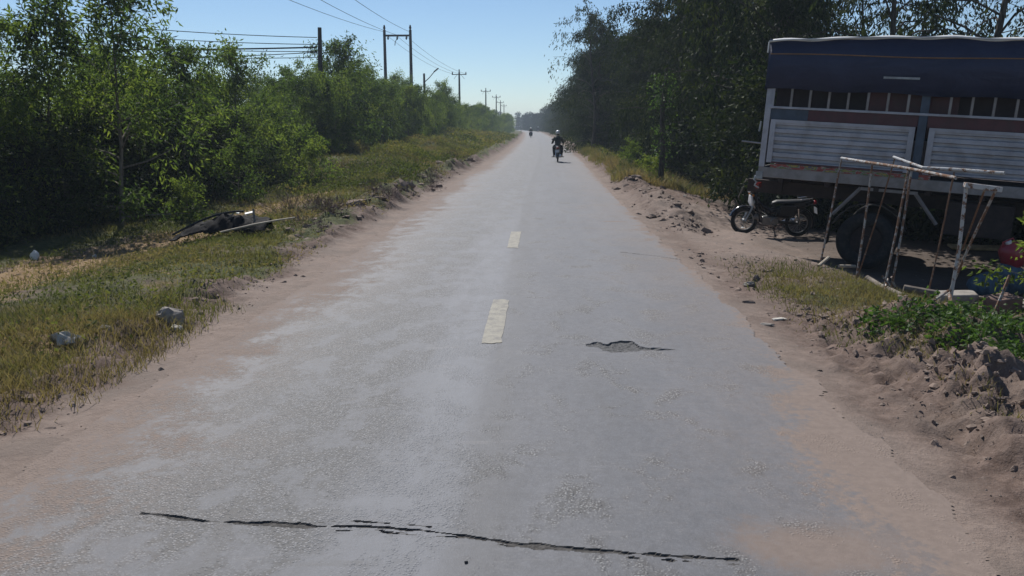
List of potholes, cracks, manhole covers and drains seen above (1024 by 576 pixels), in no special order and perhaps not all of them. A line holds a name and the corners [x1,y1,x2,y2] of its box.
crack [139,512,740,566]
pothole [586,340,675,353]
